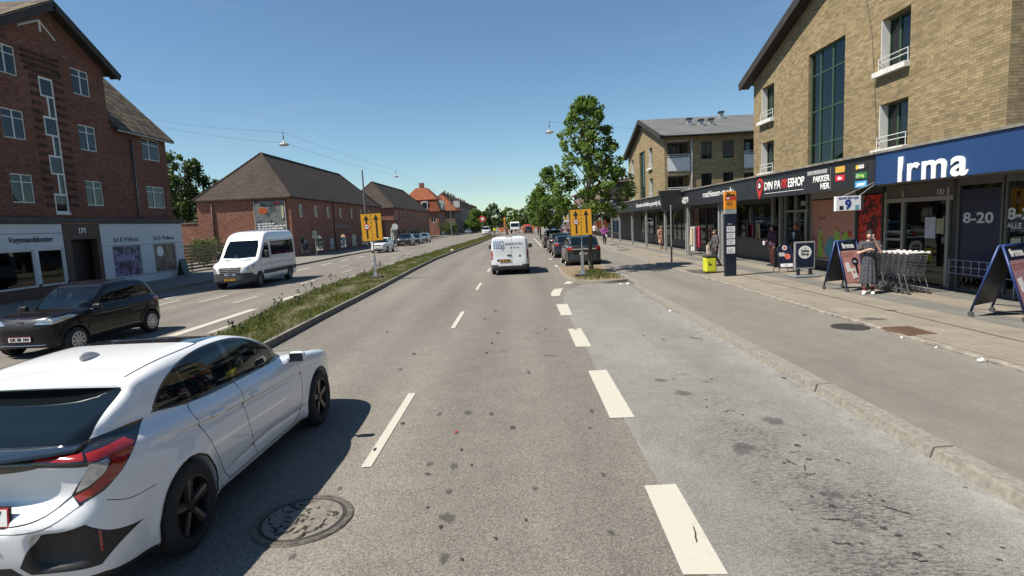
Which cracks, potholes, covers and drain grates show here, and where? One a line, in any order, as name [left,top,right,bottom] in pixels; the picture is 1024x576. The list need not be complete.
manhole cover [249,495,354,547]
